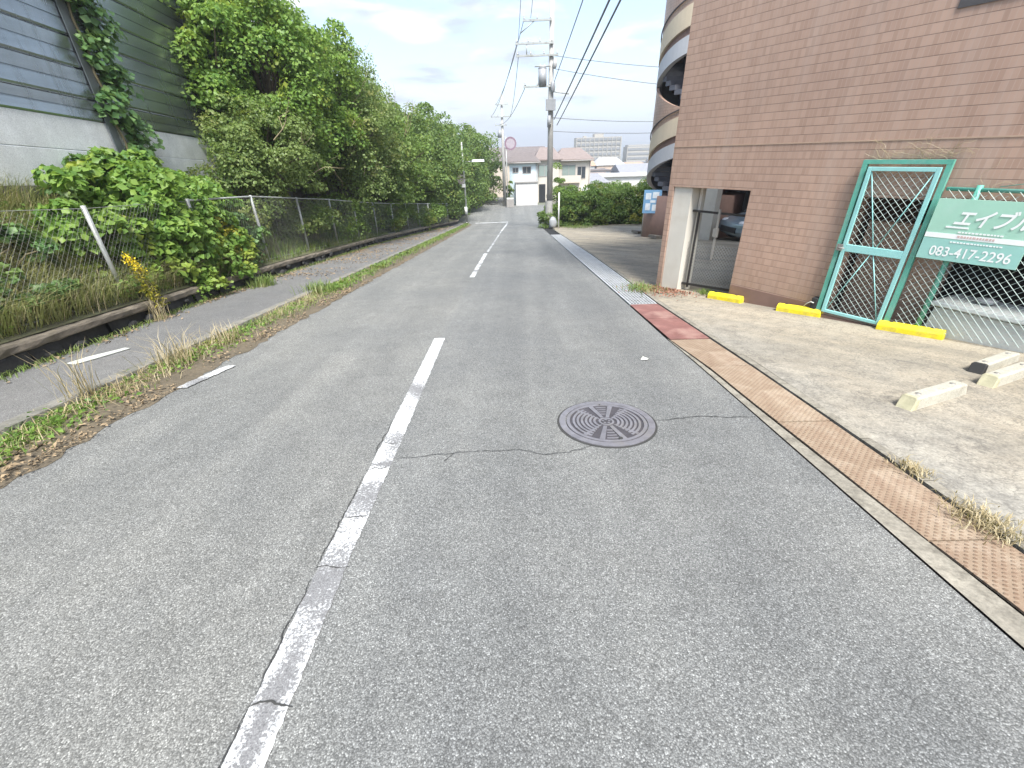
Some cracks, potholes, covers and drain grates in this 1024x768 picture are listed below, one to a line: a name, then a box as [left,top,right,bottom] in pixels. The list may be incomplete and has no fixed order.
crack [247,699,293,708]
drain grate [605,282,640,293]
drain grate [616,292,657,306]
drain grate [597,275,628,283]
drain grate [589,268,619,276]
manhole cover [557,401,658,448]
crack [364,442,594,472]
